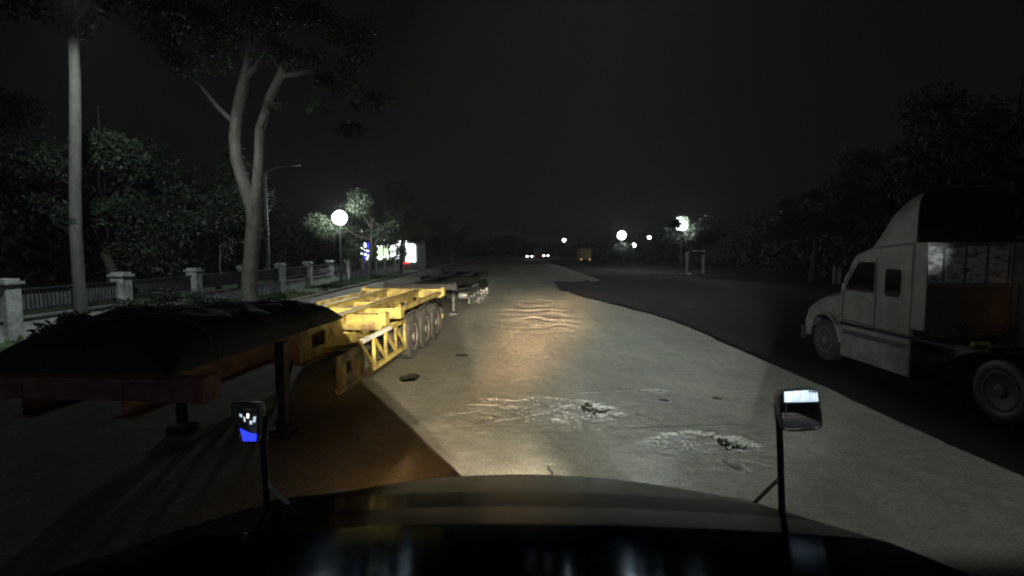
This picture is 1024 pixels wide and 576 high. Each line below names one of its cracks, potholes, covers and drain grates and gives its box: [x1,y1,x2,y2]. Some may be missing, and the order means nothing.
pothole [457,394,632,429]
pothole [396,372,423,384]
crack [543,465,558,475]
pothole [633,428,773,454]
